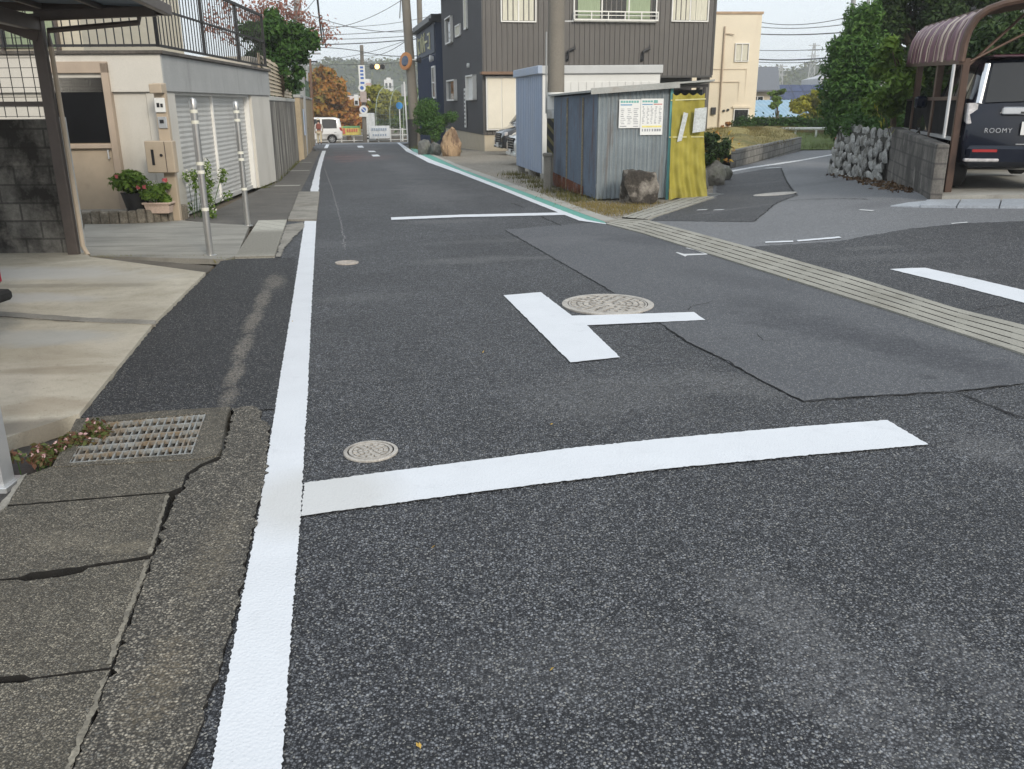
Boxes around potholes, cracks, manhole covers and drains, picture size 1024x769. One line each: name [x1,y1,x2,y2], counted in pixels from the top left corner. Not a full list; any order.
crack [324,169,346,250]
manhole cover [562,294,654,315]
drain grate [53,407,231,467]
manhole cover [343,440,398,463]
